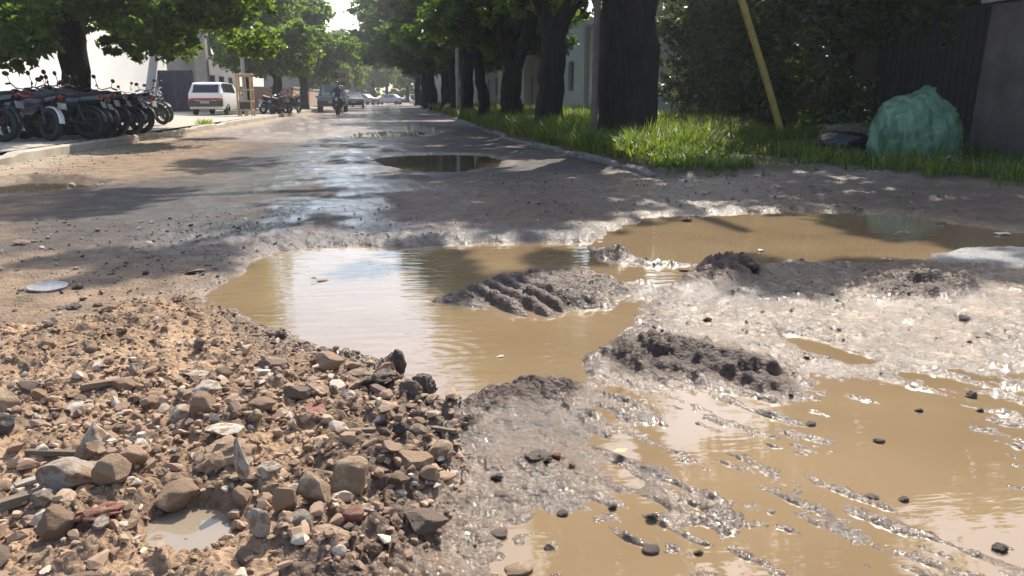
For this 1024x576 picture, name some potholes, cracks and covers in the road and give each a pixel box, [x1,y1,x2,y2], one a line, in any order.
pothole [570,205,1024,270]
pothole [760,320,898,371]
pothole [358,152,513,173]
pothole [119,477,255,559]
pothole [323,126,449,138]
pothole [178,231,685,401]
pothole [489,336,1024,576]
